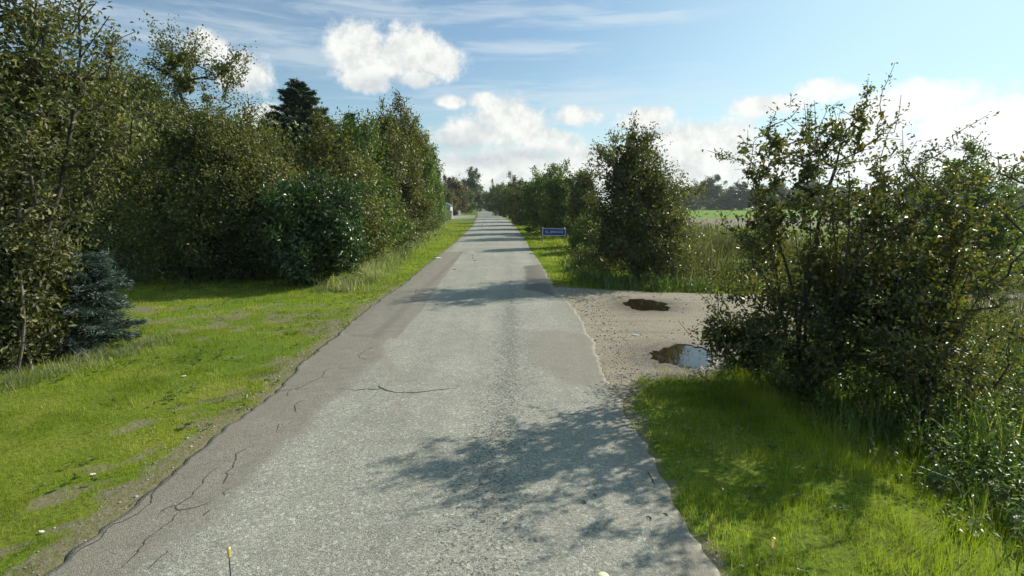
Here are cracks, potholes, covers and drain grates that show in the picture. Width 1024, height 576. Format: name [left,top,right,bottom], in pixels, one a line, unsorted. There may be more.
crack [57,442,246,570]
pothole [622,299,670,311]
pothole [648,344,713,369]
crack [277,316,458,429]
